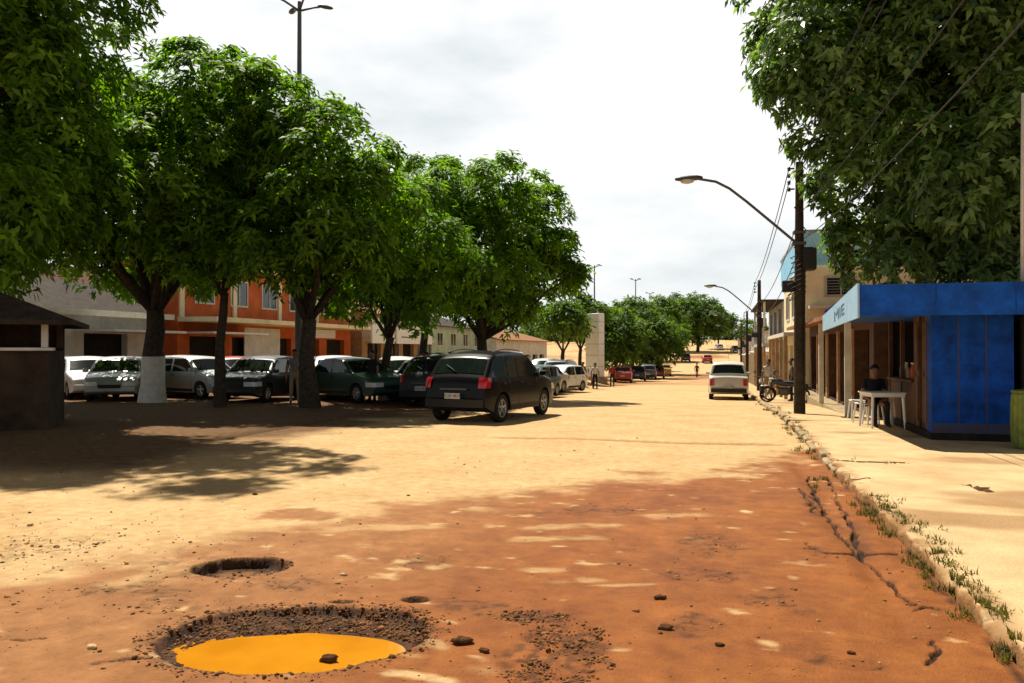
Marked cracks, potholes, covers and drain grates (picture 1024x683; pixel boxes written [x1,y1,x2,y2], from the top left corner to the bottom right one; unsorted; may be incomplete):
pothole [151,606,432,675]
crack [925,639,944,666]
pothole [188,557,296,579]
crack [797,460,937,612]
